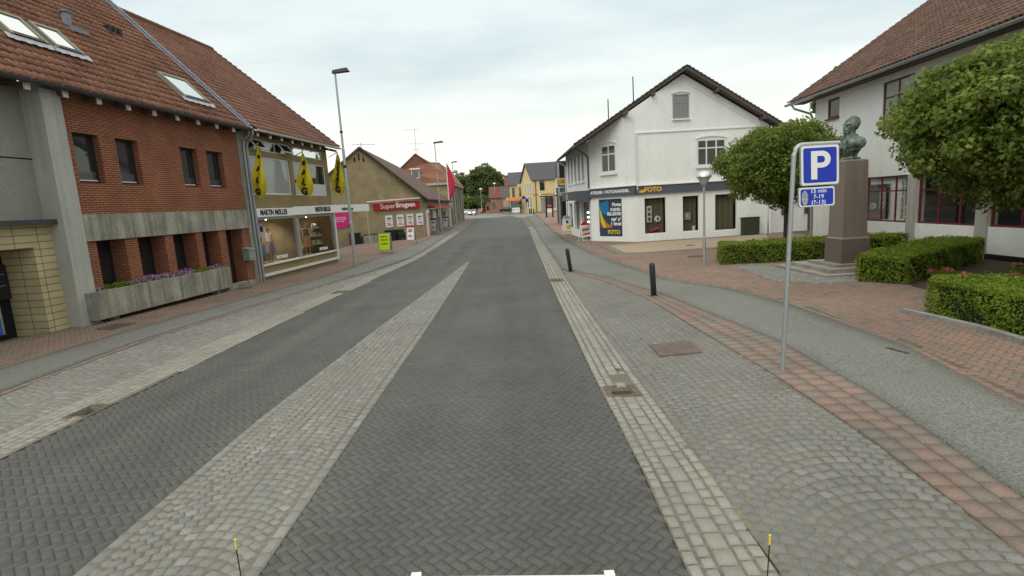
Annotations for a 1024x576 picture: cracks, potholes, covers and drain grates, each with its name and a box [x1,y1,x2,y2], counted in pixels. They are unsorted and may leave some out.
manhole cover [649,340,703,357]
drain grate [603,384,643,397]
drain grate [62,403,115,418]
